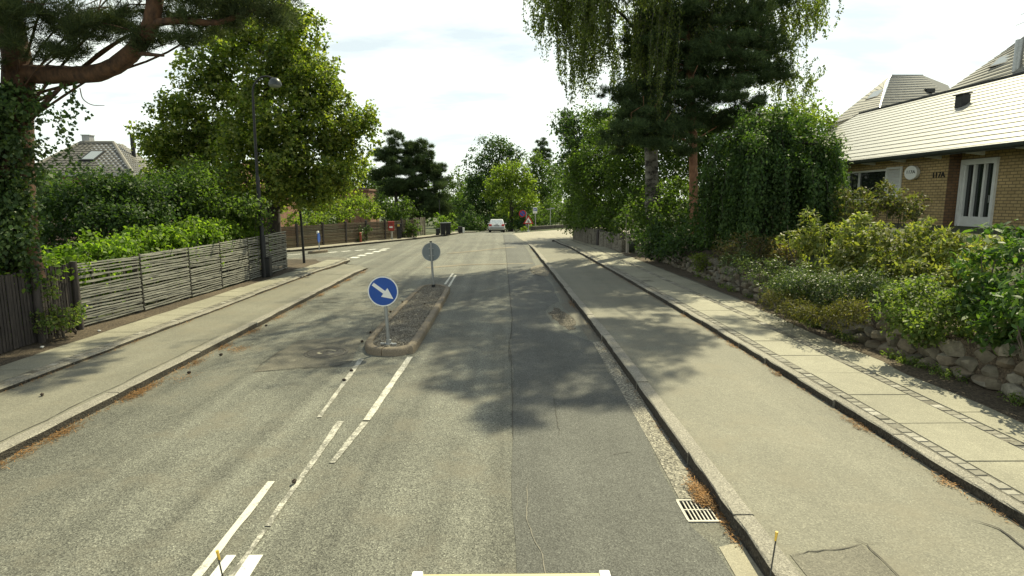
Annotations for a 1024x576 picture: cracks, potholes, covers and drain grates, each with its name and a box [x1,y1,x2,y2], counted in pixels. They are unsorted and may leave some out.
drain grate [676,499,725,523]
crack [526,485,546,574]
manhole cover [303,347,349,358]
crack [974,520,1024,548]
